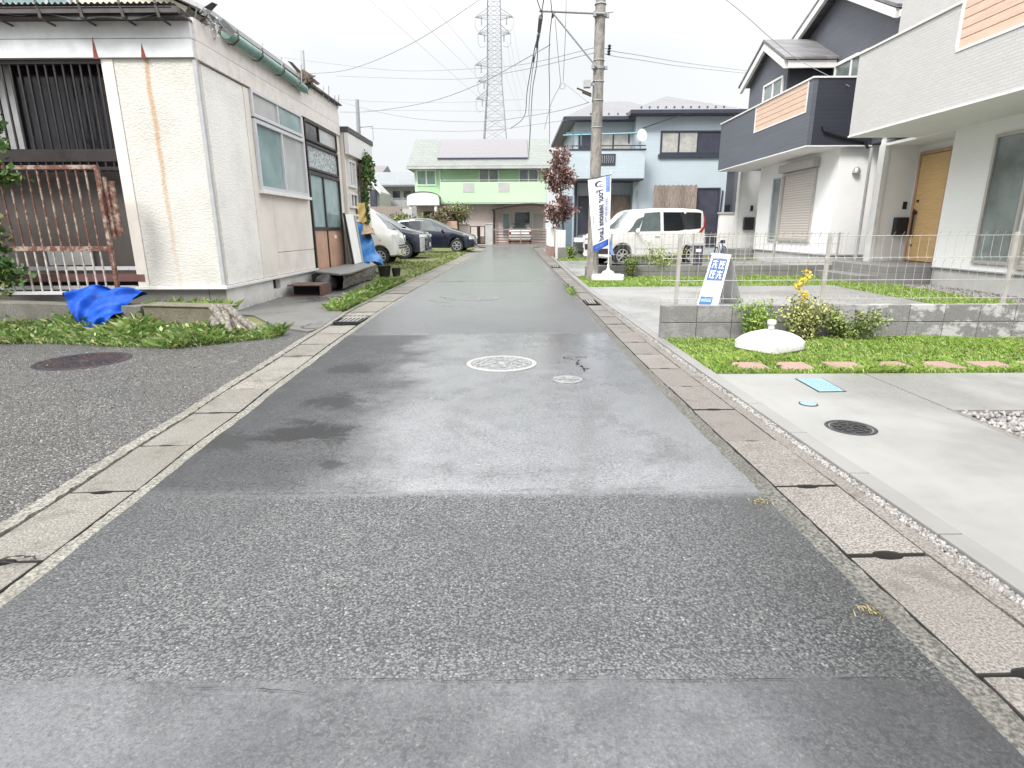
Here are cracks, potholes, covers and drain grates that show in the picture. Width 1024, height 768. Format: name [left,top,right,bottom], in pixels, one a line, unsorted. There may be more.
manhole cover [30,352,133,371]
manhole cover [824,420,878,436]
manhole cover [553,375,582,383]
drain grate [333,315,371,325]
manhole cover [467,356,537,372]
